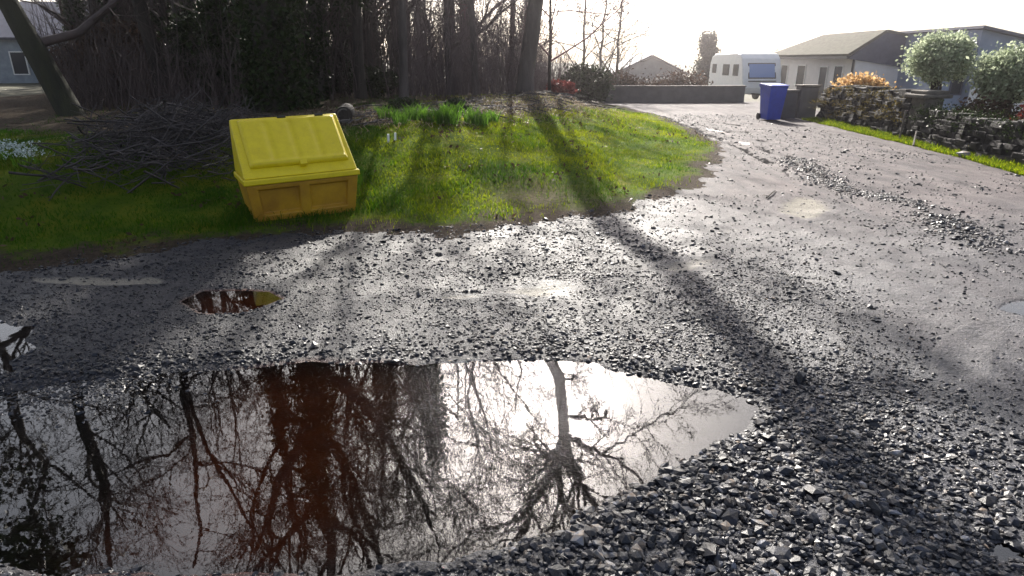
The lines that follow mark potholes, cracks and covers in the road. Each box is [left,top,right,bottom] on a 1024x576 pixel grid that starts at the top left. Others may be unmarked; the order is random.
pothole [0,354,770,576]
pothole [178,288,285,315]
pothole [1003,302,1024,316]
pothole [0,316,45,374]
